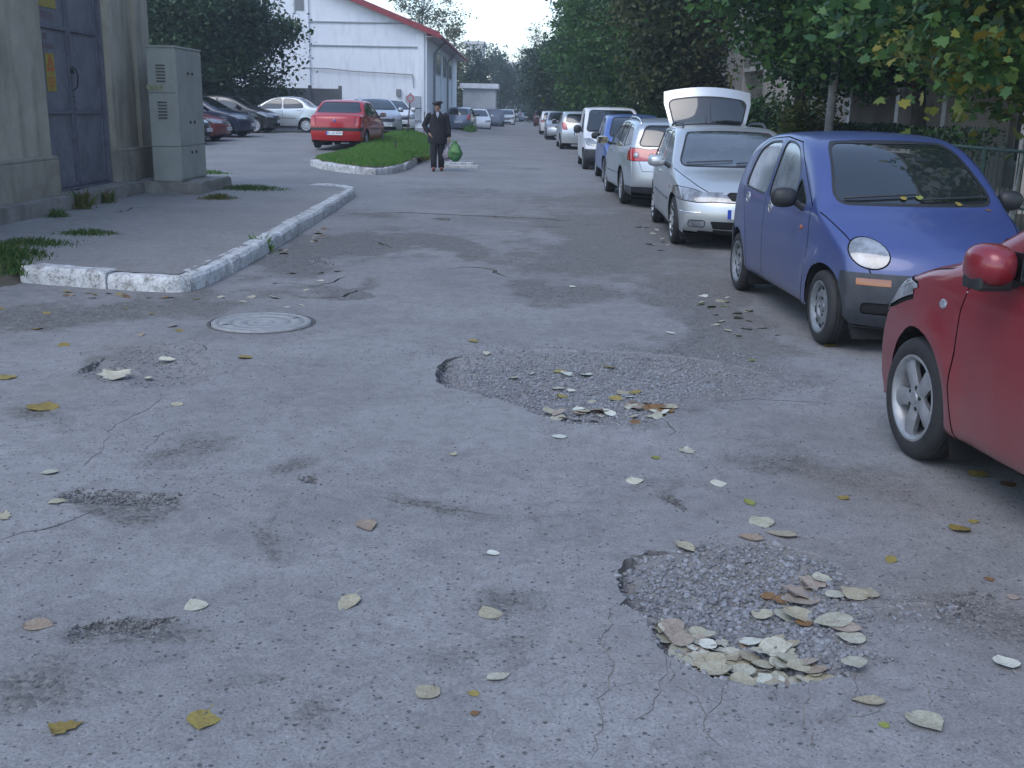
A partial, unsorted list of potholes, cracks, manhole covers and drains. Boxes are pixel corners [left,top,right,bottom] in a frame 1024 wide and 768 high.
pothole [434,349,781,426]
pothole [614,540,959,688]
crack [553,608,729,760]
pothole [57,487,190,508]
pothole [64,615,179,646]
pothole [71,341,219,389]
crack [1,512,91,540]
crack [68,392,179,468]
manhole cover [206,312,316,334]
